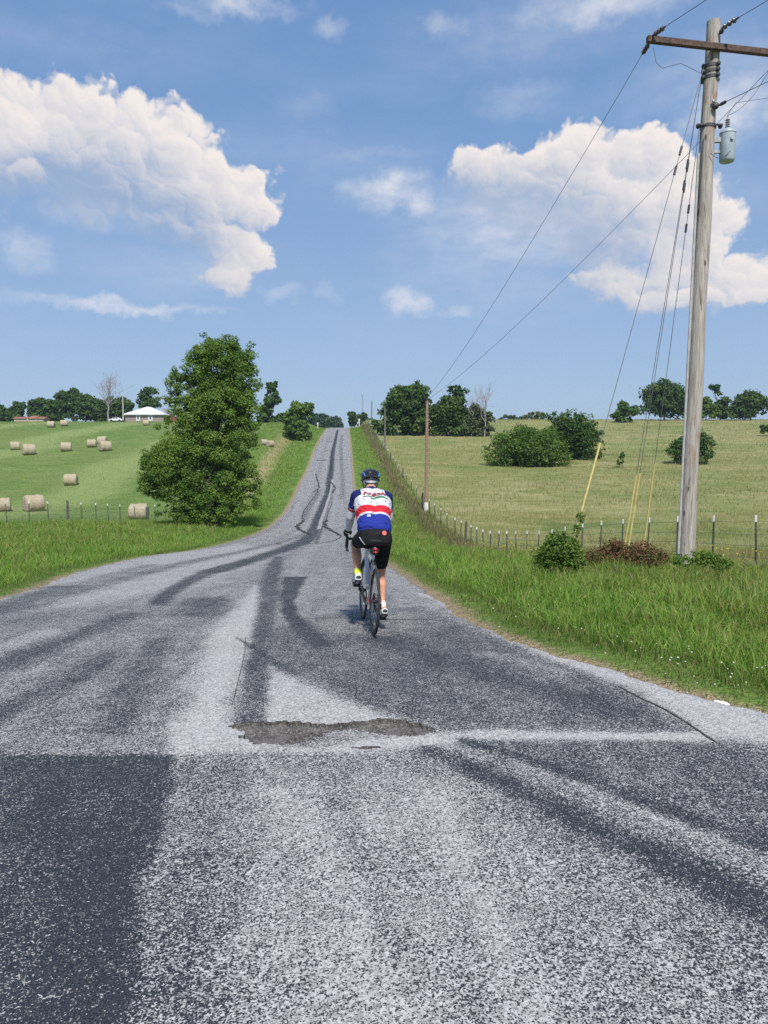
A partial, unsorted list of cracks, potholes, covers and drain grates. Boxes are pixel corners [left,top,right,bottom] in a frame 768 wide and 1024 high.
pothole [228,718,436,745]
